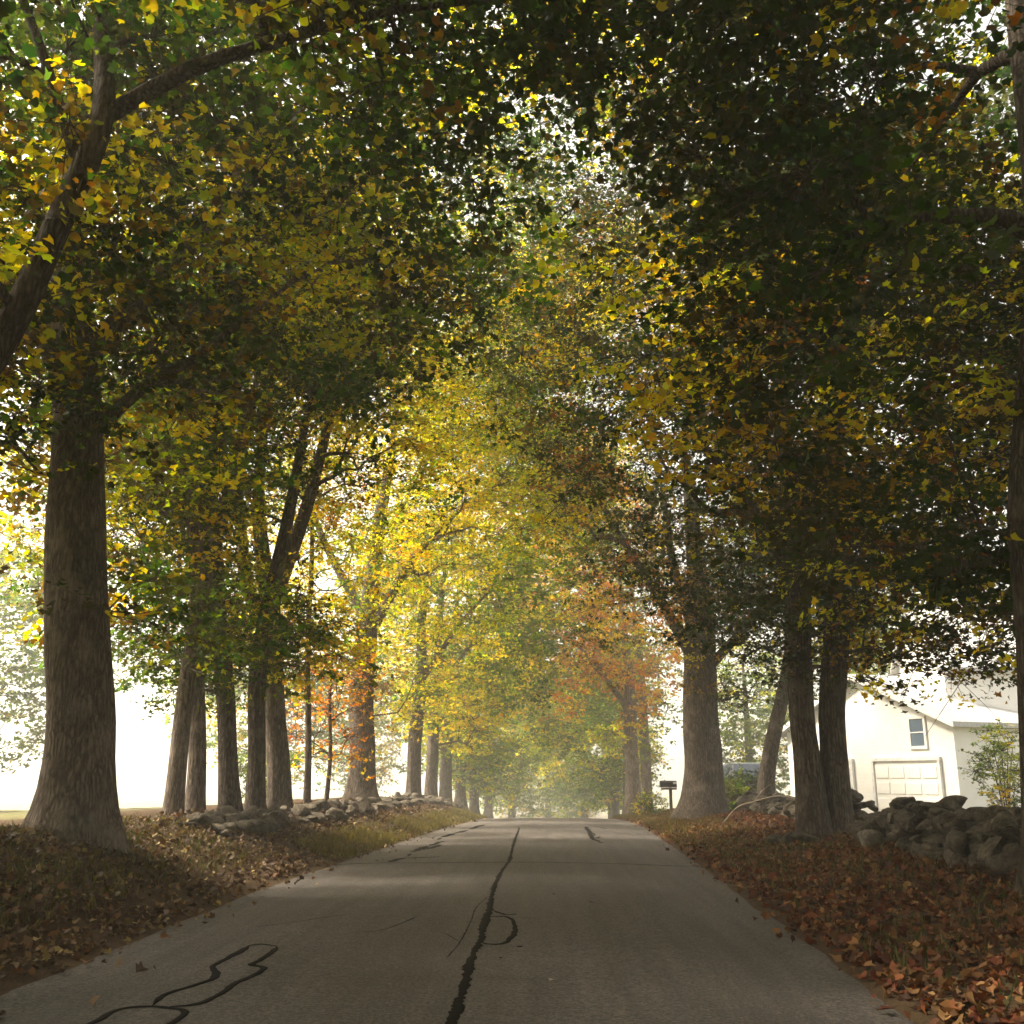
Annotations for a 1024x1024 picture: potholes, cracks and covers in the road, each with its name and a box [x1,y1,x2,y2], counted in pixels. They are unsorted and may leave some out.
crack [336,825,697,1024]
